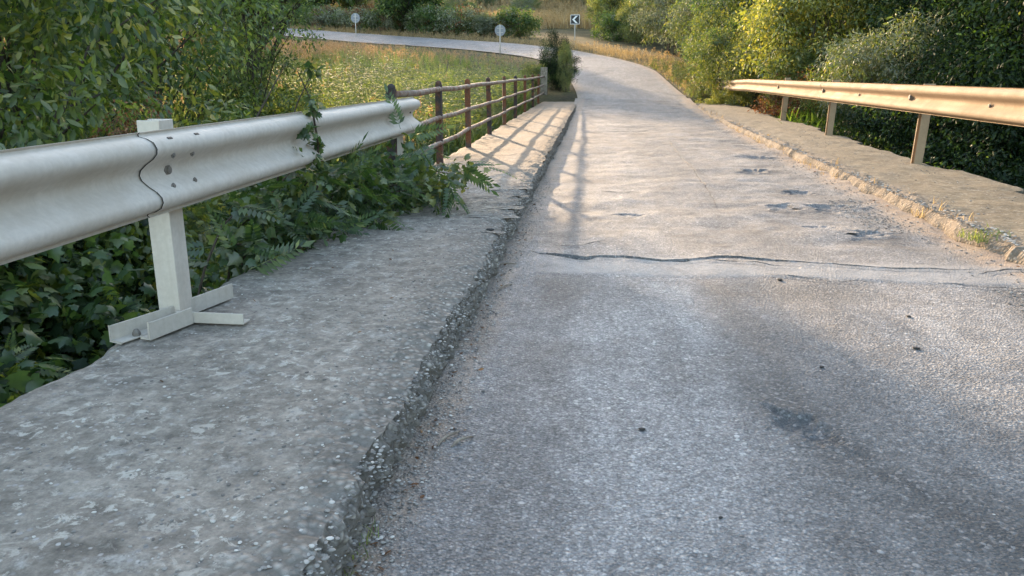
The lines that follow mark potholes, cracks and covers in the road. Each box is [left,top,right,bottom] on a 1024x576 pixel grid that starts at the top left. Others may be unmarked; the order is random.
pothole [822,229,901,241]
pothole [770,188,829,196]
pothole [755,202,813,214]
pothole [719,153,793,161]
crack [521,238,1024,291]
